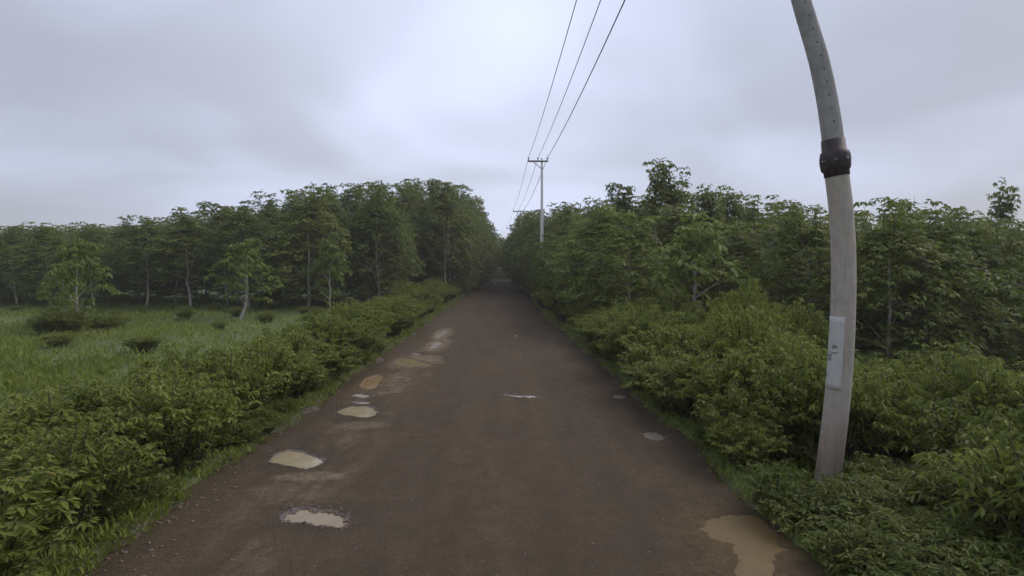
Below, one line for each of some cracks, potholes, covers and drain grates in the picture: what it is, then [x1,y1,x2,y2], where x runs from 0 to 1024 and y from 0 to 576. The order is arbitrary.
pothole [638,431,668,441]
pothole [359,374,385,389]
pothole [268,449,327,469]
pothole [694,512,790,576]
pothole [278,506,353,528]
pothole [338,405,380,417]
